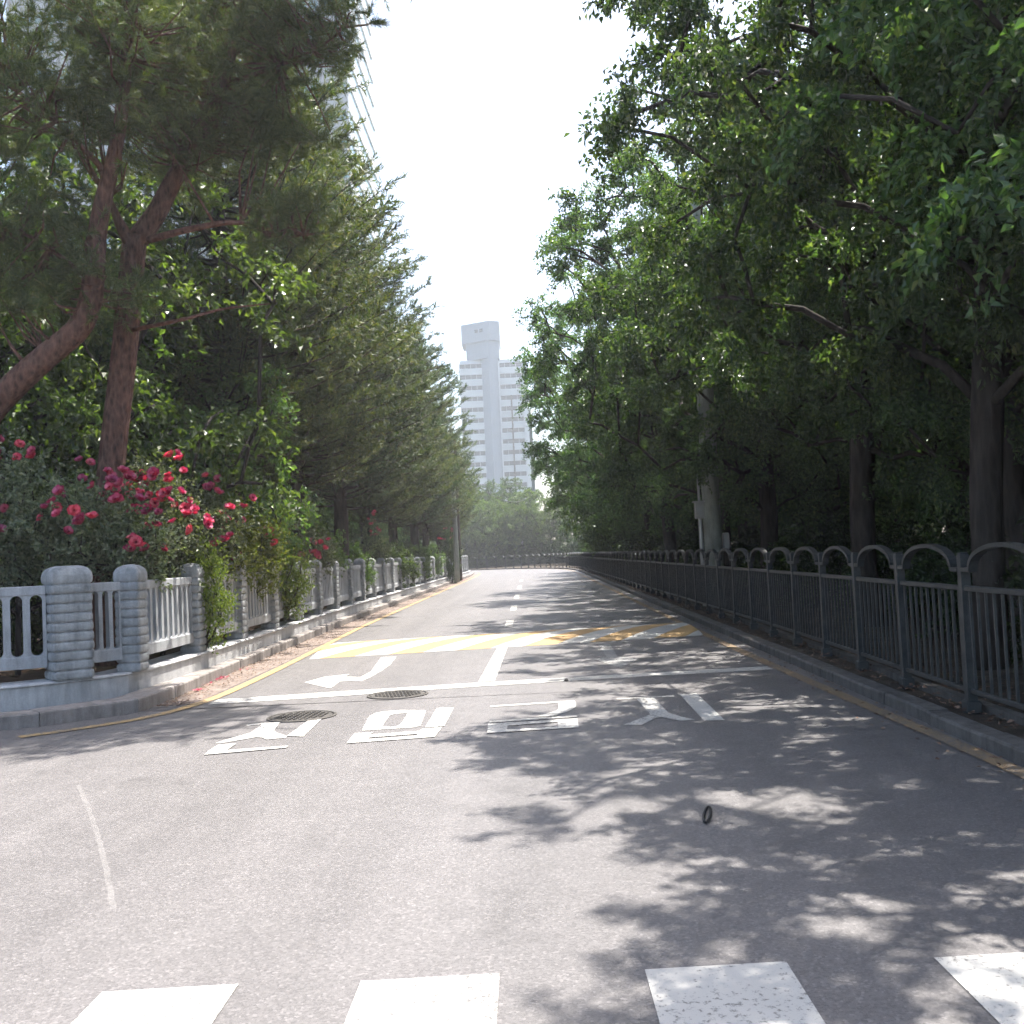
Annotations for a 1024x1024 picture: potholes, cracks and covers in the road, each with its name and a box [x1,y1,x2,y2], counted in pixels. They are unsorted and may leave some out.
manhole cover [266,710,337,723]
manhole cover [367,690,428,700]
